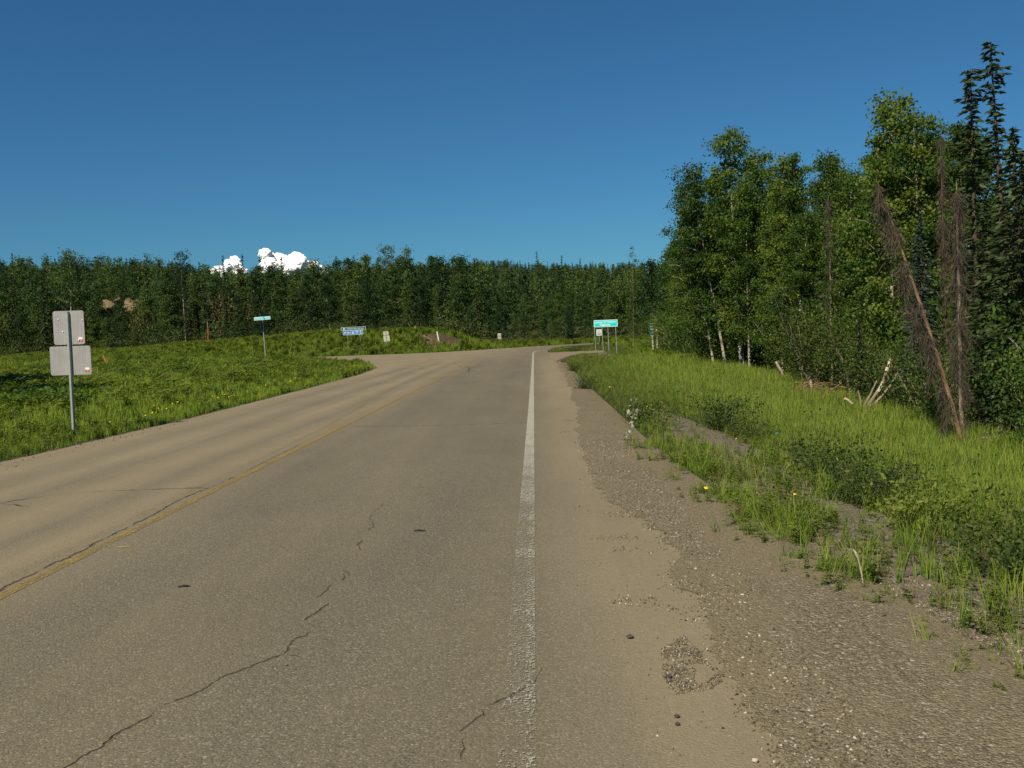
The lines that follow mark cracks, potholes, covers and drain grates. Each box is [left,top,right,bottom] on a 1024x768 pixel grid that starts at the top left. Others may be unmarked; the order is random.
crack [459,667,543,760]
crack [63,504,382,768]
